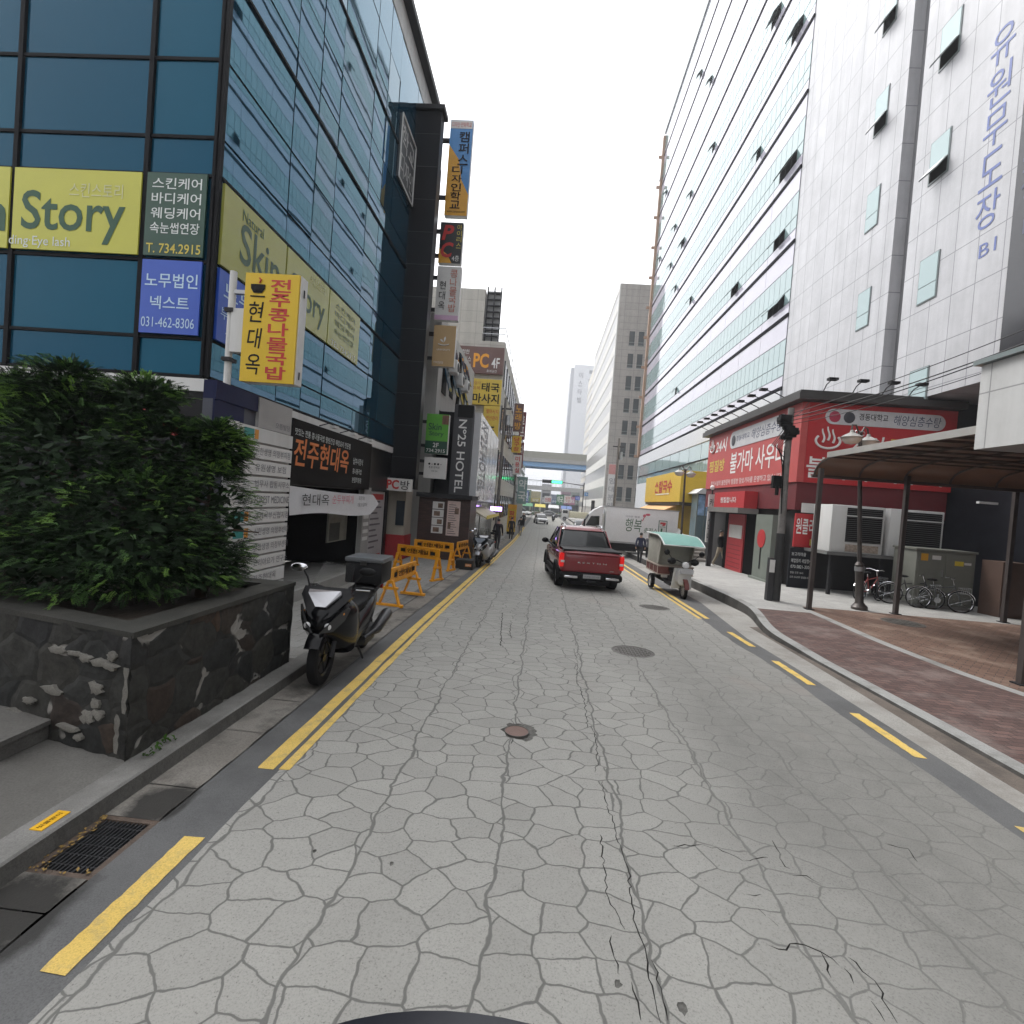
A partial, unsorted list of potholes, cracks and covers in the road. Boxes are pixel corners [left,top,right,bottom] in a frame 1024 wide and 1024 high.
manhole cover [504,725,529,738]
crack [600,783,668,1023]
manhole cover [611,645,655,658]
crack [677,840,814,881]
drain grate [21,815,160,936]
crack [574,652,599,771]
crack [769,943,897,1022]
